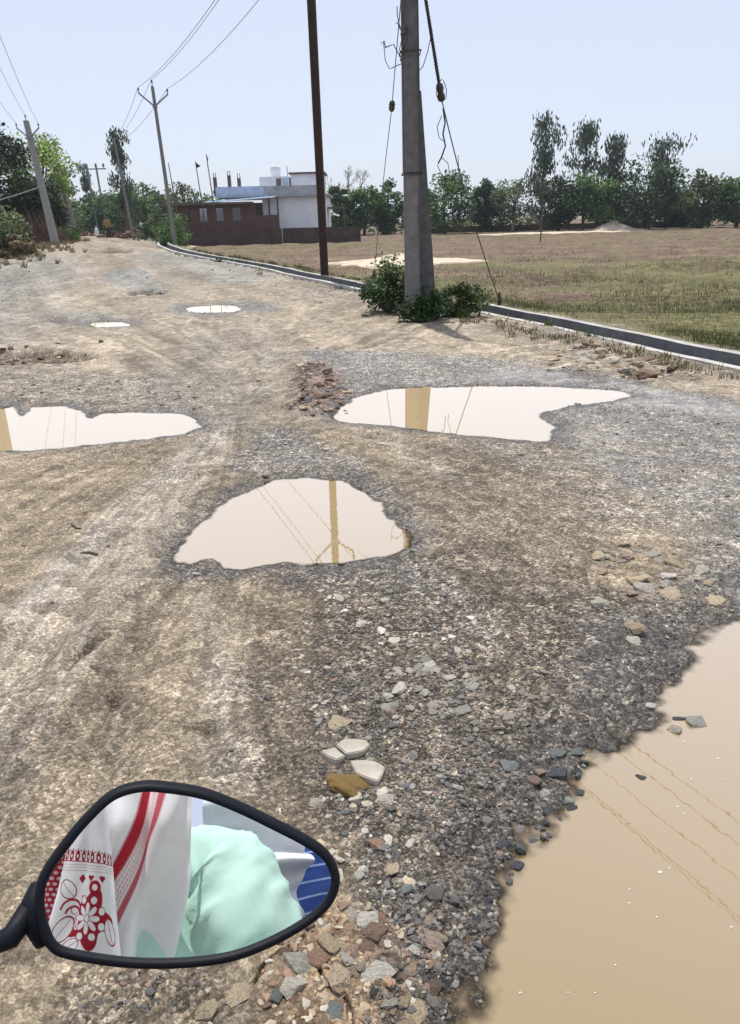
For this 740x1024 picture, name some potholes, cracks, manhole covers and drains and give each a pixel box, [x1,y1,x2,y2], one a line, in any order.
pothole [184,304,244,313]
pothole [328,384,637,442]
pothole [168,476,416,571]
pothole [0,405,205,452]
pothole [0,344,106,366]
pothole [433,615,740,1024]
pothole [122,288,168,296]
